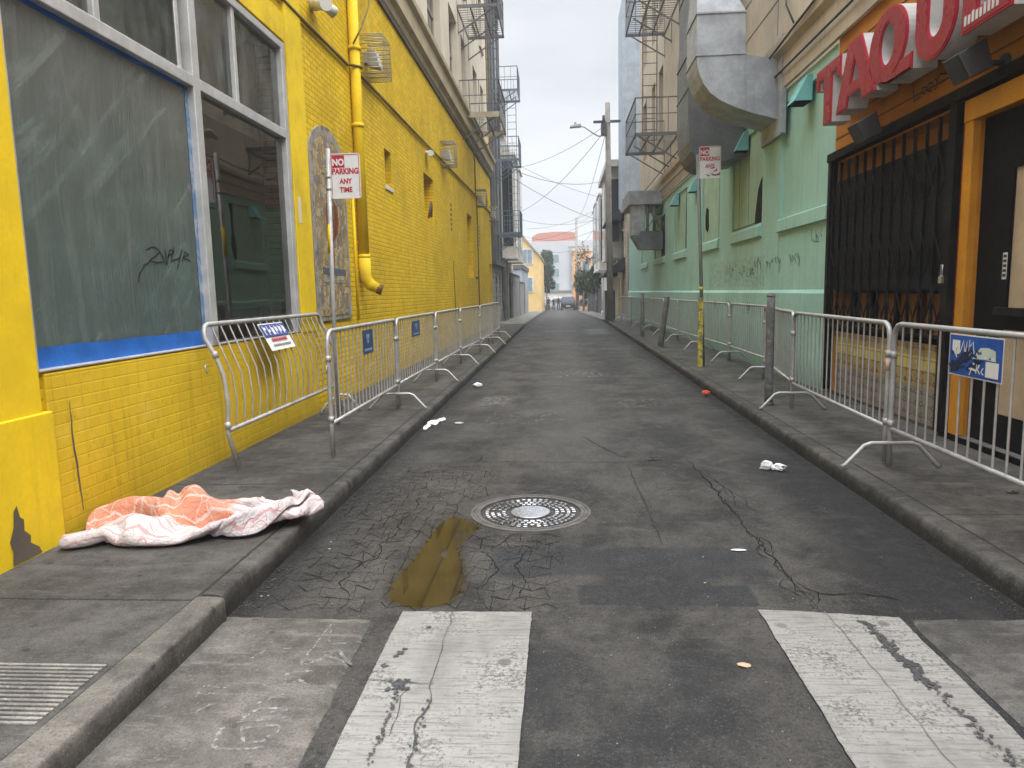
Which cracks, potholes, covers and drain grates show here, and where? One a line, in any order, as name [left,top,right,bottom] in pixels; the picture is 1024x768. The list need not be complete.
manhole cover [471,494,591,532]
crack [682,456,958,768]
crack [257,463,564,613]
